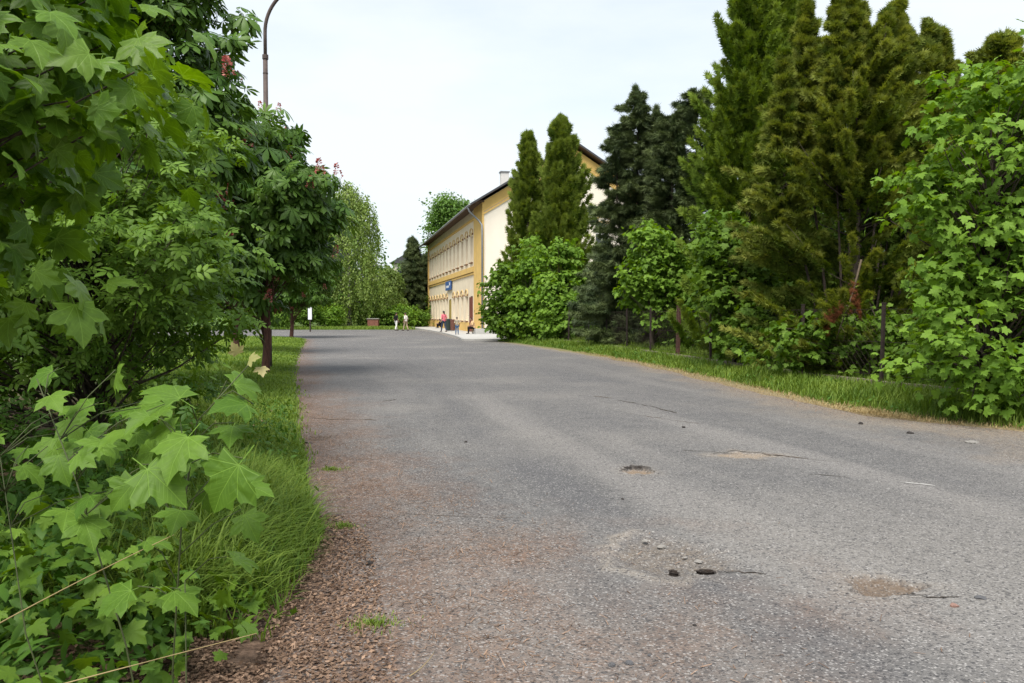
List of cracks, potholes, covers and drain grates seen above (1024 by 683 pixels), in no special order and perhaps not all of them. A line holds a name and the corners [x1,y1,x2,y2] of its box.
pothole [830,571,945,601]
pothole [614,463,661,476]
pothole [585,527,770,589]
pothole [702,449,788,460]
